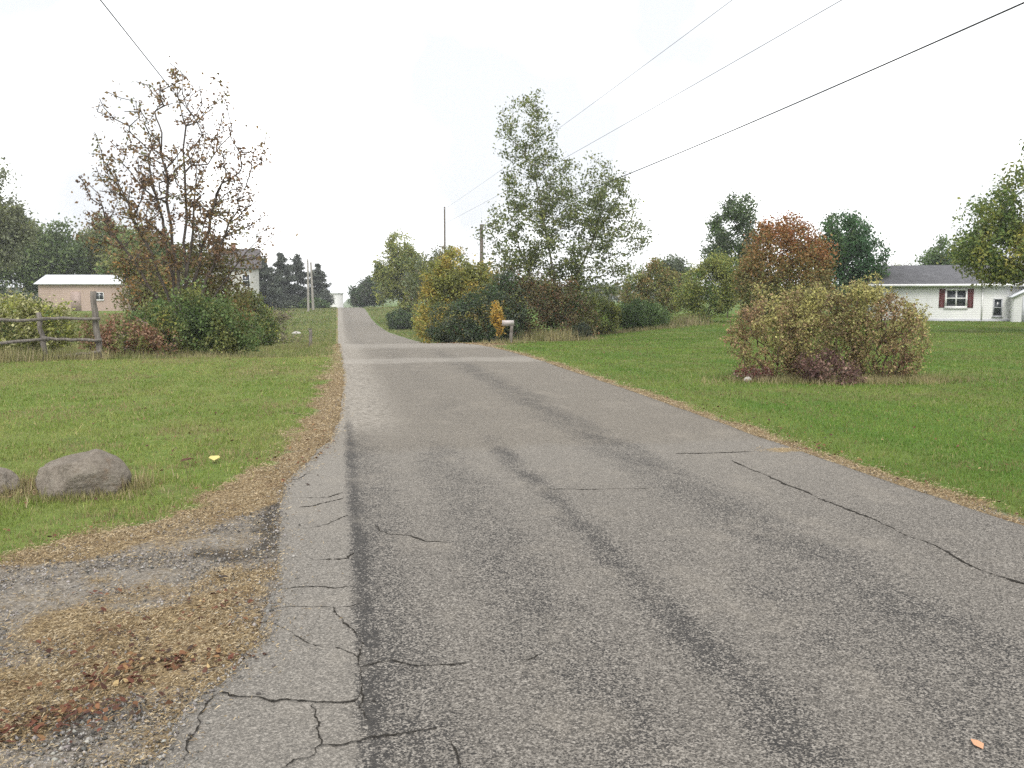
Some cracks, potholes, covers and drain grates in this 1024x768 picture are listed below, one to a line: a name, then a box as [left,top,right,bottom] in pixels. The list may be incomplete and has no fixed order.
crack [294,473,350,528]
crack [732,460,1024,584]
crack [183,602,467,768]
